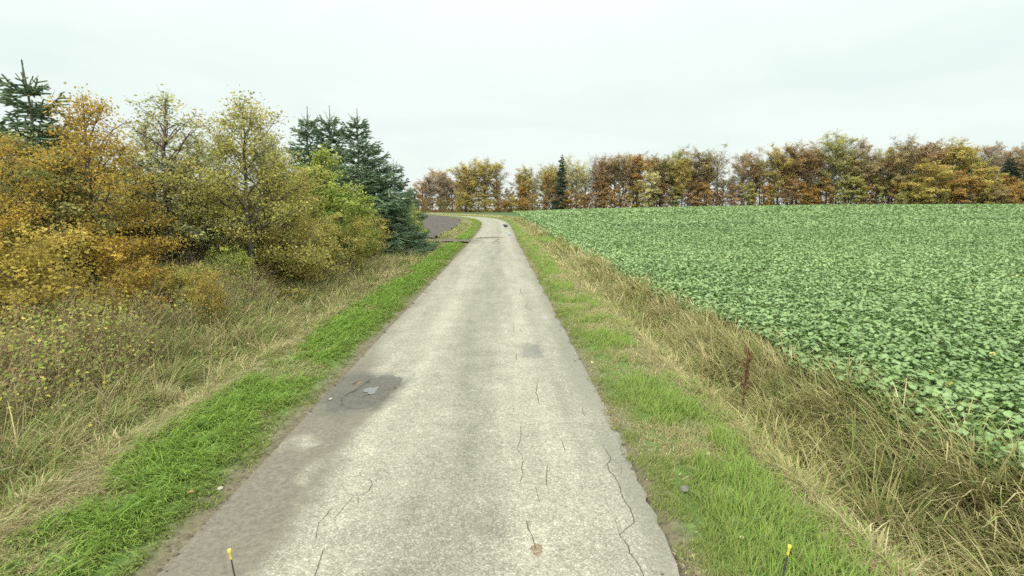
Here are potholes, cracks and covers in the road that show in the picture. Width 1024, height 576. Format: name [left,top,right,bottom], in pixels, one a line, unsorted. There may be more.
crack [517,428,565,502]
crack [603,446,644,576]
crack [309,475,373,576]
